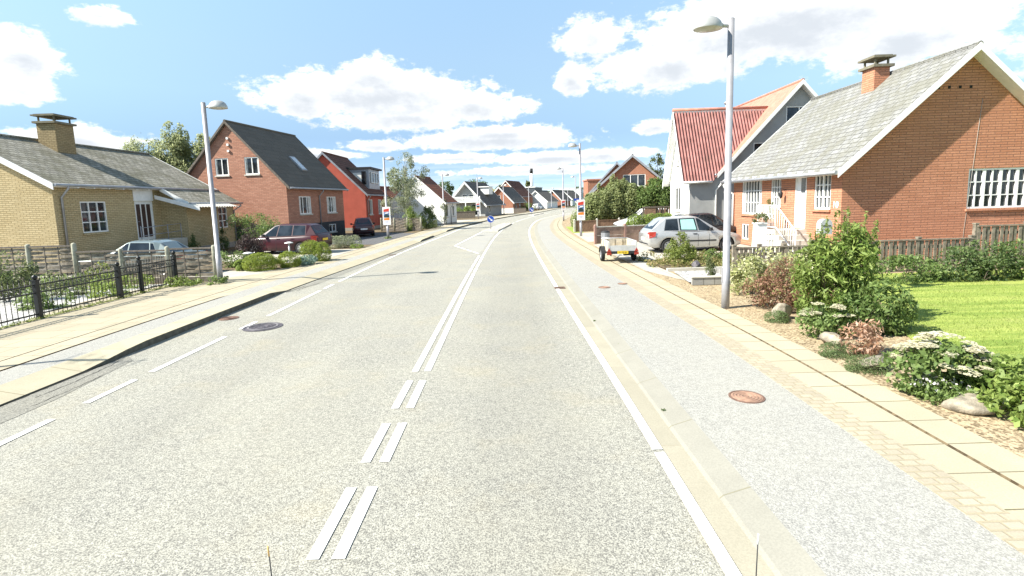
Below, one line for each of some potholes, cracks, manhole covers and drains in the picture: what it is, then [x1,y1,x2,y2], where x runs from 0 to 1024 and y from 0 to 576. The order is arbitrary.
manhole cover [728,390,765,404]
manhole cover [242,322,283,332]
